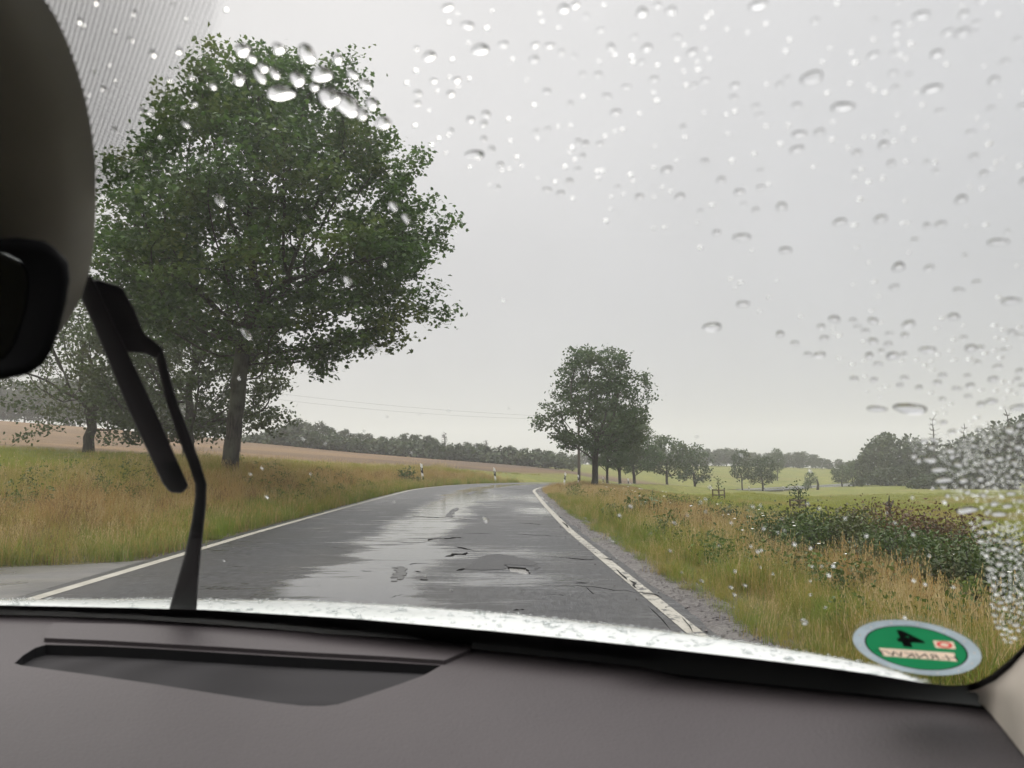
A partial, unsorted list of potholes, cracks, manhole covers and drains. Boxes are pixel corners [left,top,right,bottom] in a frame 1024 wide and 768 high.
pothole [508,566,530,574]
crack [402,516,488,551]
crack [505,554,693,632]
